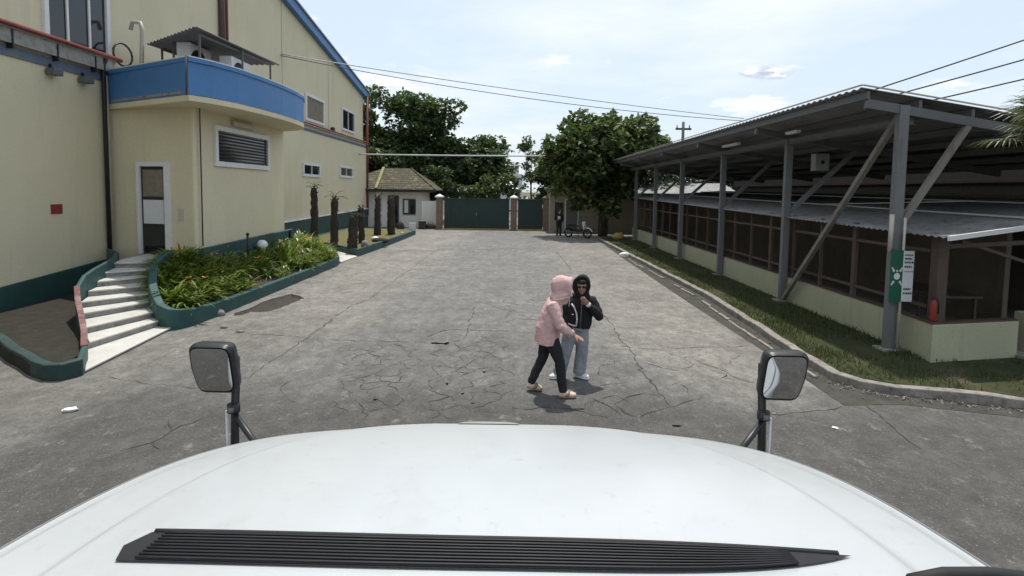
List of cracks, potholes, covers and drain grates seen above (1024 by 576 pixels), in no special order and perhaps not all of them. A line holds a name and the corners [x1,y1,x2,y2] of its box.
crack [246,299,538,420]
crack [518,316,749,417]
crack [867,406,921,449]
crack [124,418,202,450]
